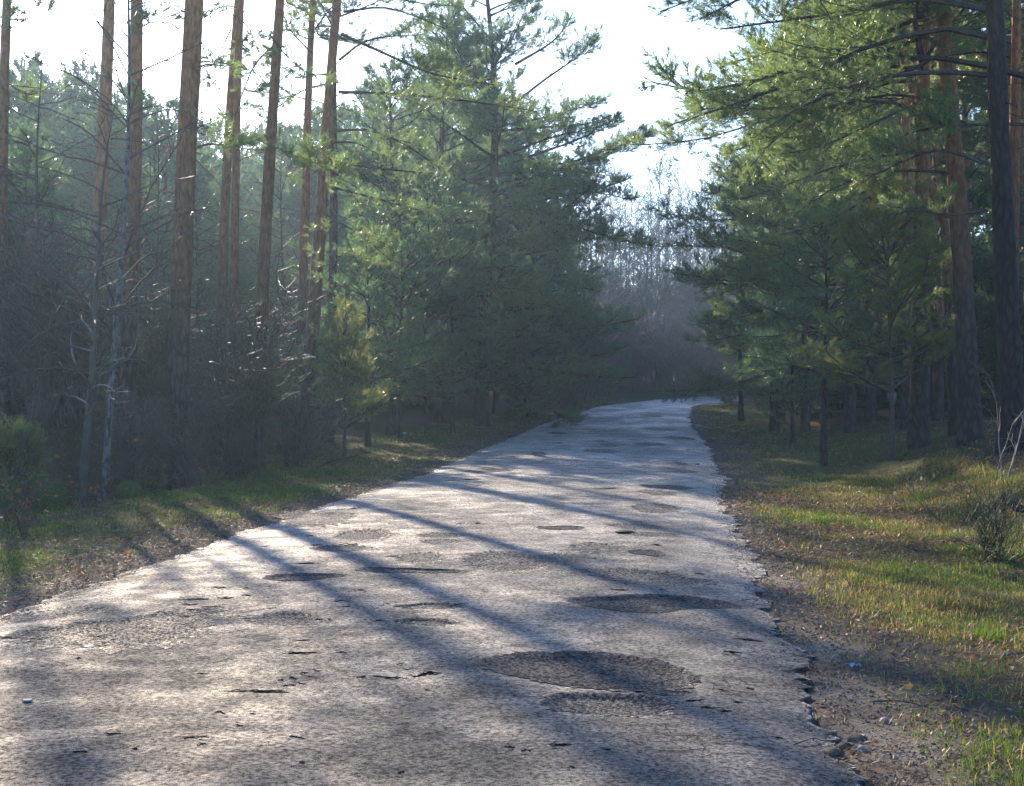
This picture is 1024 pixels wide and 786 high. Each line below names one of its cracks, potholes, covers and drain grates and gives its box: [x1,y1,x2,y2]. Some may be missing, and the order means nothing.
pothole [263,573,351,581]
pothole [629,502,677,513]
pothole [535,691,680,717]
pothole [396,617,461,626]
pothole [567,594,741,613]
pothole [480,651,700,693]
